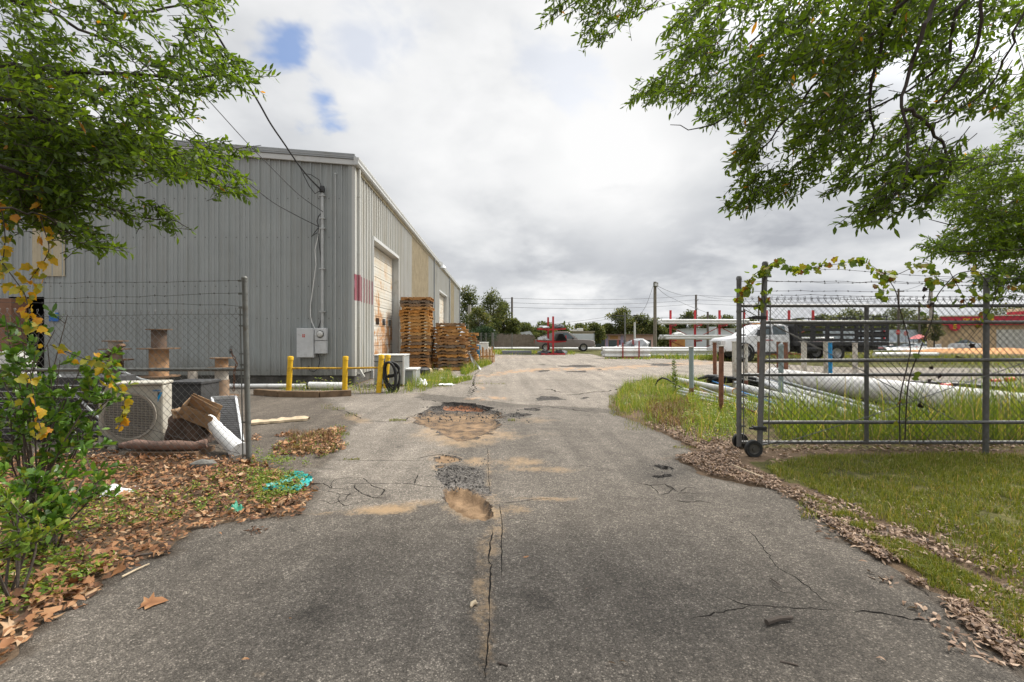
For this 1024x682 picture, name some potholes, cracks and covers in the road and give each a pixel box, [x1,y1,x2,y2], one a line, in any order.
crack [312,475,430,506]
pothole [412,402,508,442]
pothole [434,465,494,521]
crack [641,483,708,503]
crack [693,522,941,624]
